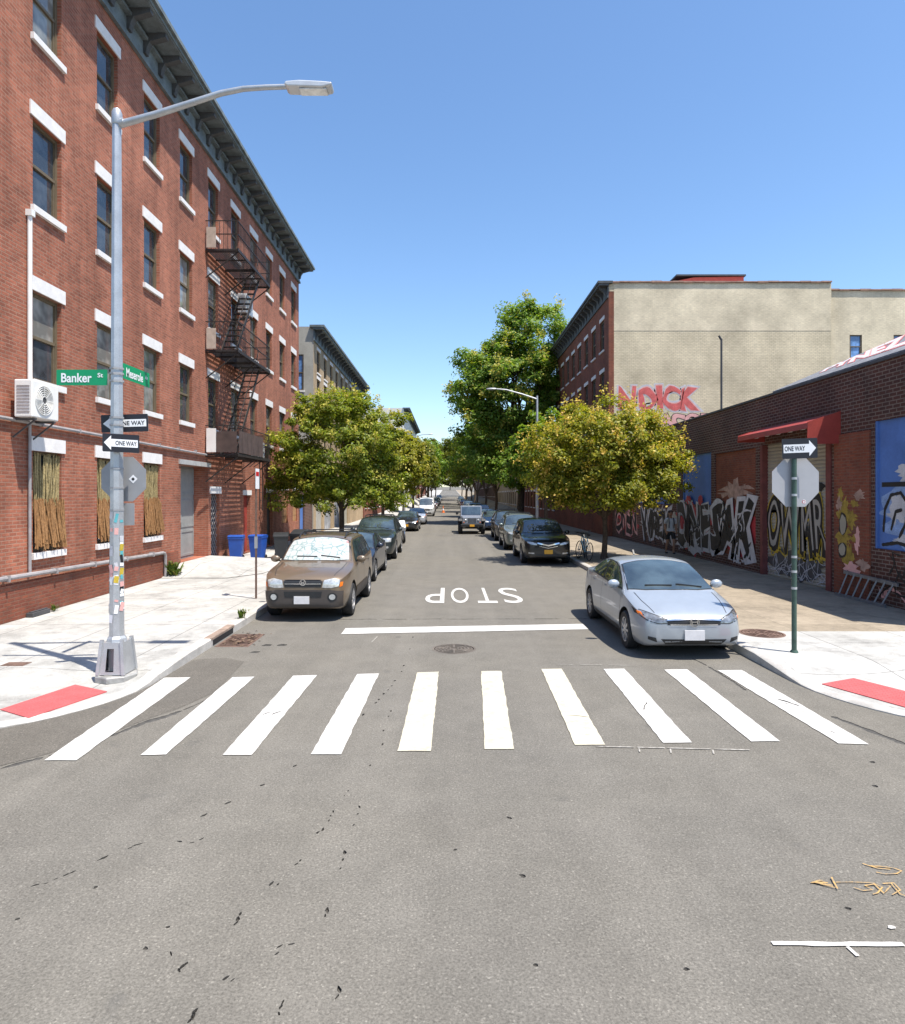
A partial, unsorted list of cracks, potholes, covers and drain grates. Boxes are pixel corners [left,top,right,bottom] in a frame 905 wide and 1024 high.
manhole cover [432,644,476,654]
crack [187,943,295,1023]
manhole cover [739,629,786,638]
drain grate [203,624,265,647]
